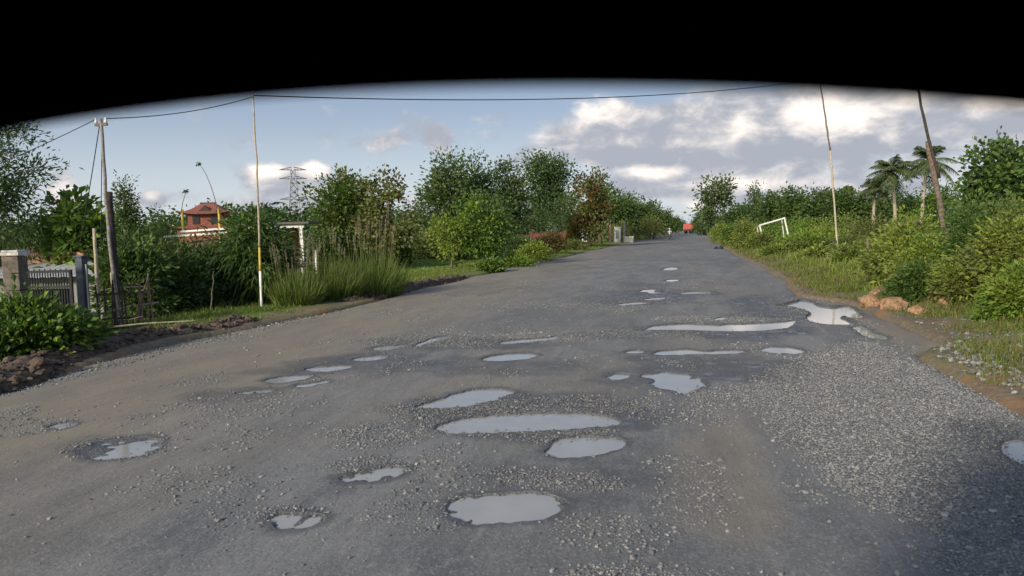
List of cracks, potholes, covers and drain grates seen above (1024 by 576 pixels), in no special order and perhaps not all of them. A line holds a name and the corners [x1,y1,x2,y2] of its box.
pothole [777,299,865,325]
pothole [445,490,570,525]
pothole [759,346,806,354]
pothole [267,511,326,530]
pothole [434,411,623,434]
pothole [639,372,706,394]
pothole [644,320,798,331]
pothole [75,435,163,460]
pothole [337,464,407,482]
pothole [997,436,1024,463]
pothole [543,435,627,458]
pothole [415,388,515,408]
